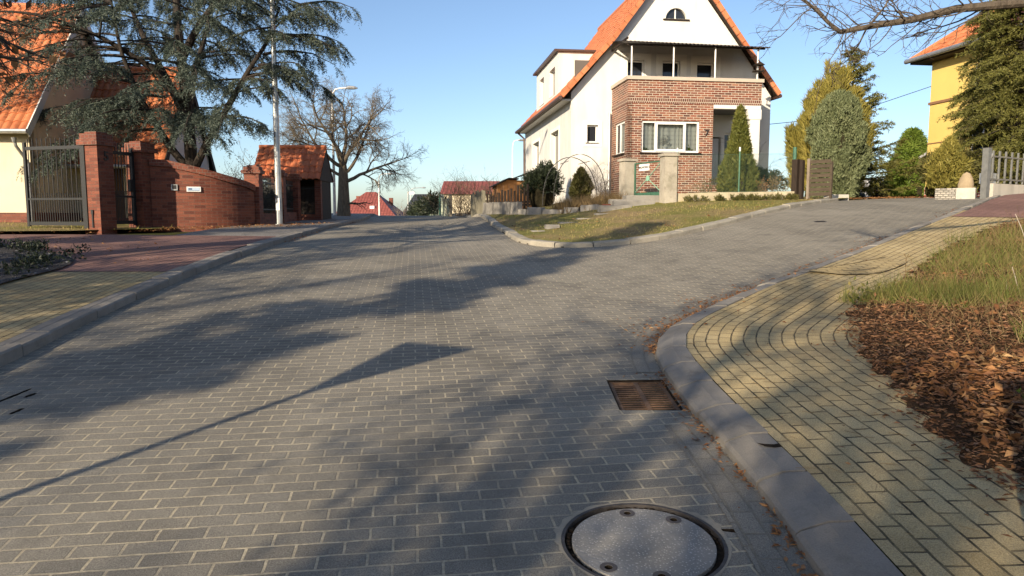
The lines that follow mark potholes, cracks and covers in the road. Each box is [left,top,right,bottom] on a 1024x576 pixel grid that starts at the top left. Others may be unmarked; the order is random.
manhole cover [554,502,732,576]
drain grate [607,380,683,410]
